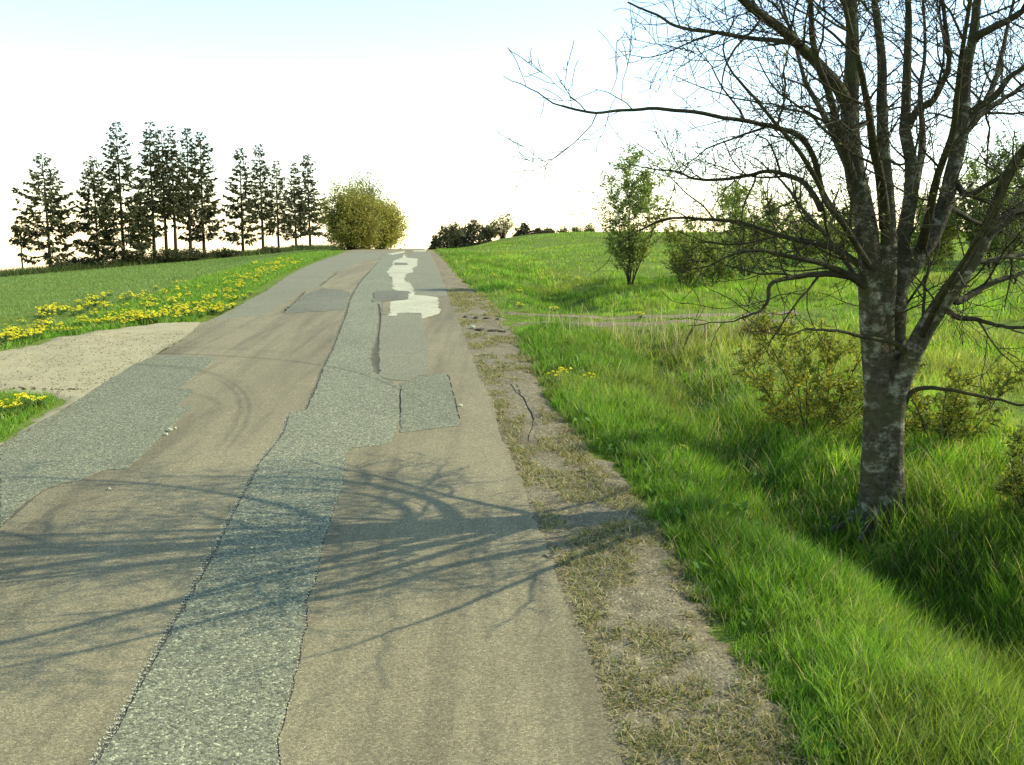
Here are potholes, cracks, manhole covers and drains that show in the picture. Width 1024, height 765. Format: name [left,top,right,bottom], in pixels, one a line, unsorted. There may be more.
crack [369,304,381,375]
crack [505,381,534,444]
